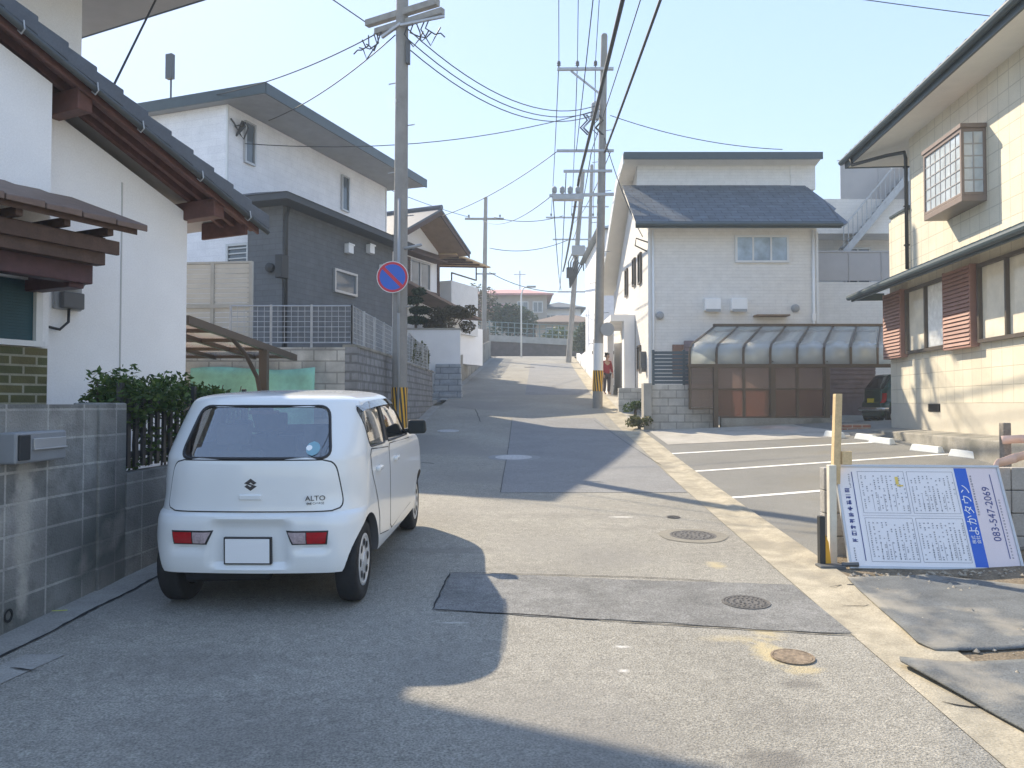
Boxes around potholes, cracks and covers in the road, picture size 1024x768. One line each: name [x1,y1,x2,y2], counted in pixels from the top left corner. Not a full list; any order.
manhole cover [722,595,771,610]
manhole cover [770,649,815,665]
manhole cover [658,529,728,543]
